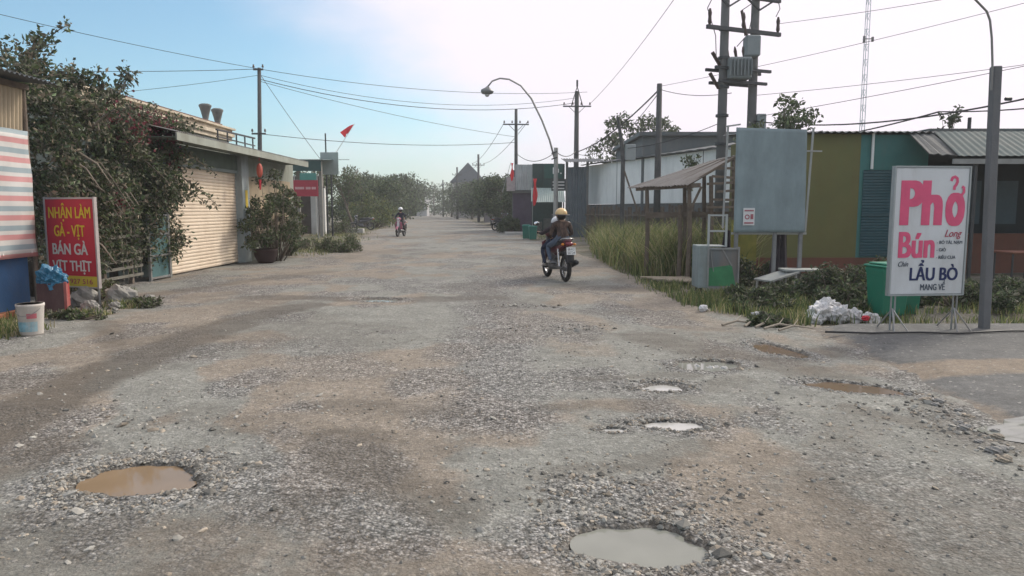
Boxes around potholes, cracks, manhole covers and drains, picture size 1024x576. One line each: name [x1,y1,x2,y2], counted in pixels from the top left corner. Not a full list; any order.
pothole [783,377,931,399]
pothole [537,515,742,576]
pothole [627,417,717,434]
pothole [625,379,698,394]
pothole [664,358,755,374]
pothole [40,456,230,501]
pothole [742,340,823,360]
